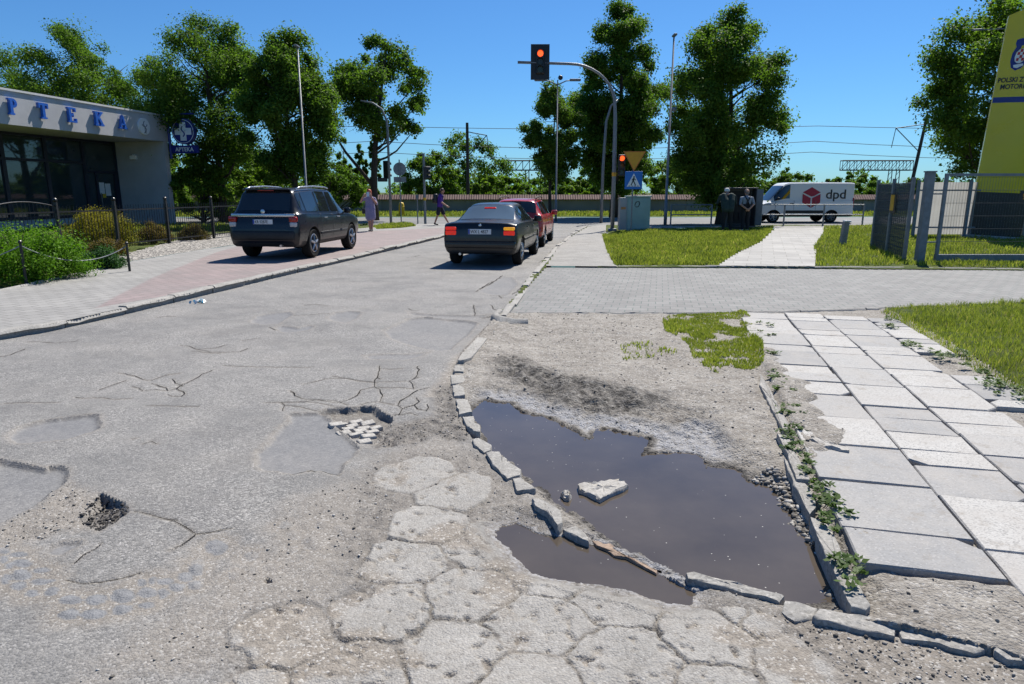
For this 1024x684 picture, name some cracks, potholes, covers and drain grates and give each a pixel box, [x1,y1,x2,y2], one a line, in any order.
crack [66,511,230,584]
crack [4,304,429,415]
pothole [80,492,133,532]
pothole [493,402,837,603]
pothole [320,405,395,449]
